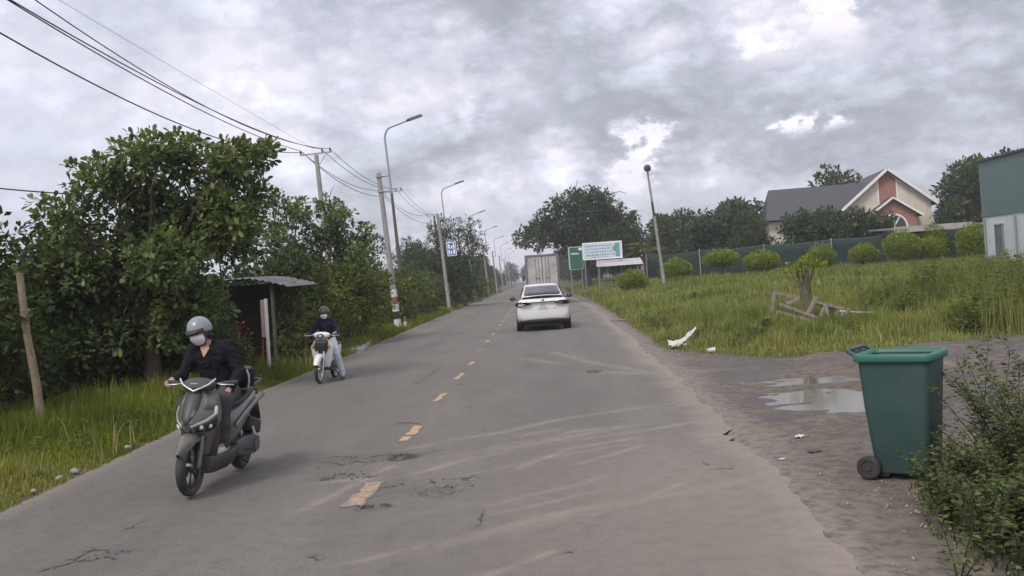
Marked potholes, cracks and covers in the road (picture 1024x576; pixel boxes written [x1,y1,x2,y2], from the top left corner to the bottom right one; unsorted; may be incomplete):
pothole [357,503,381,512]
crack [39,548,129,572]
pothole [384,451,425,463]
pothole [412,484,464,500]
